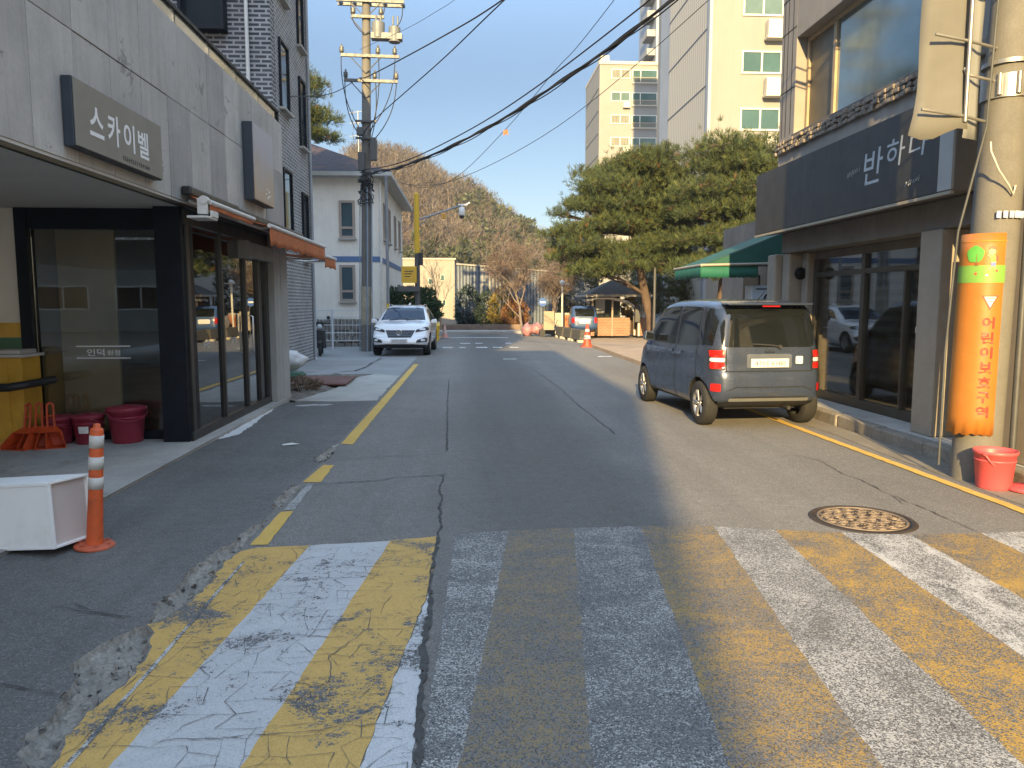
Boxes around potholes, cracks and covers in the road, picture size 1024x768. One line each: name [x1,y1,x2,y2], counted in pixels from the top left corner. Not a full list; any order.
crack [798,455,974,530]
pothole [272,484,300,510]
manhole cover [808,505,919,534]
pothole [16,625,152,768]
